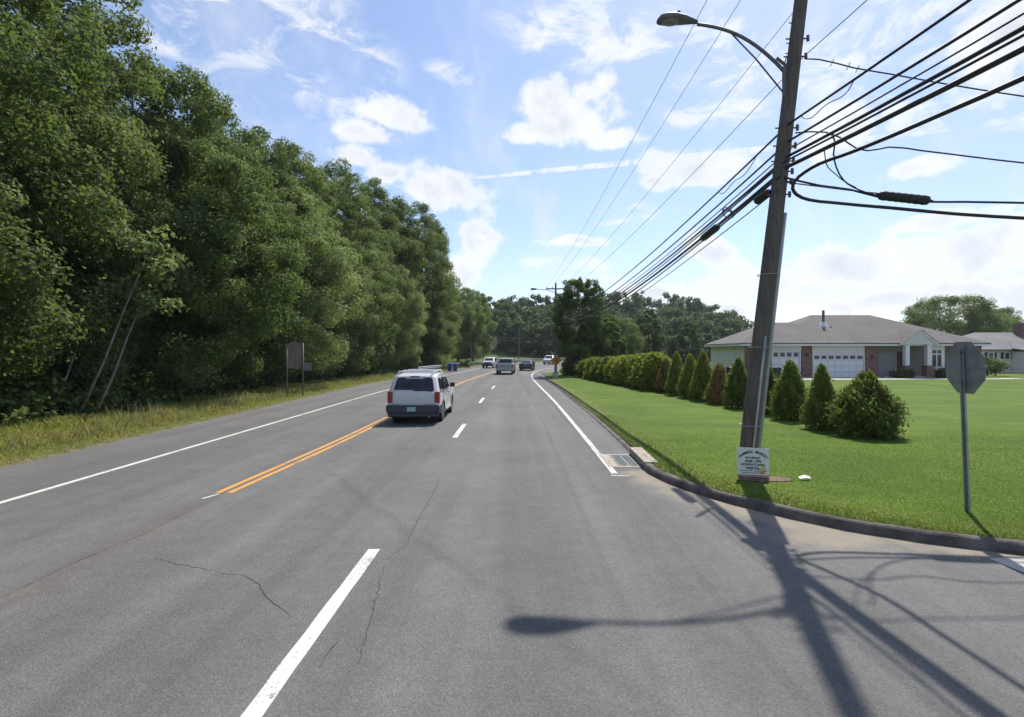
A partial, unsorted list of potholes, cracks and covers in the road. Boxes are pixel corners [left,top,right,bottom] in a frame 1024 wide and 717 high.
crack [320,484,438,666]
crack [161,559,289,615]
drain grate [599,454,641,467]
